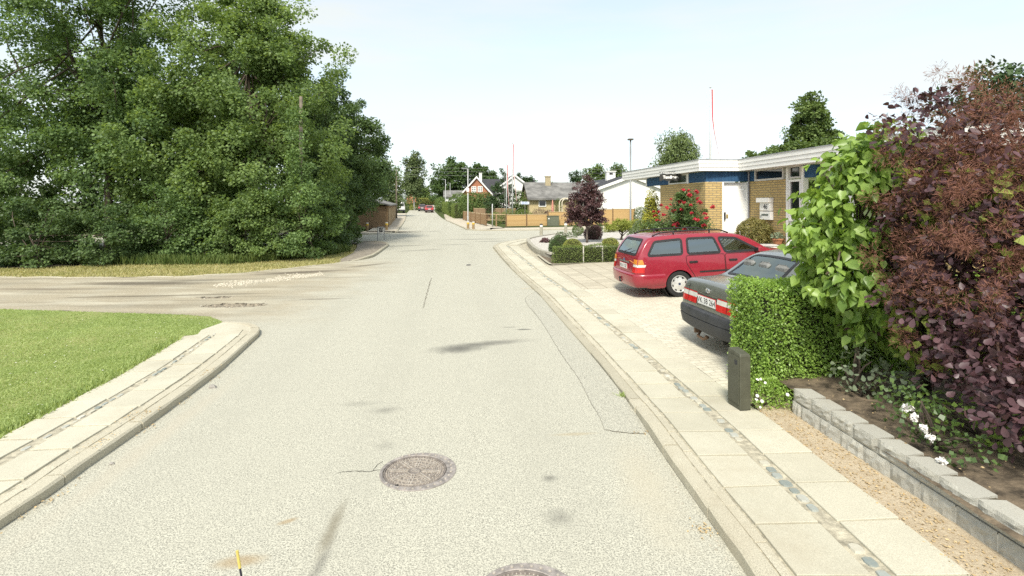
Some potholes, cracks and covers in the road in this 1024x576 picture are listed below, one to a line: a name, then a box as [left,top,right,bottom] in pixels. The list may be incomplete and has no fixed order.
manhole cover [486,563,567,576]
manhole cover [379,453,456,491]
